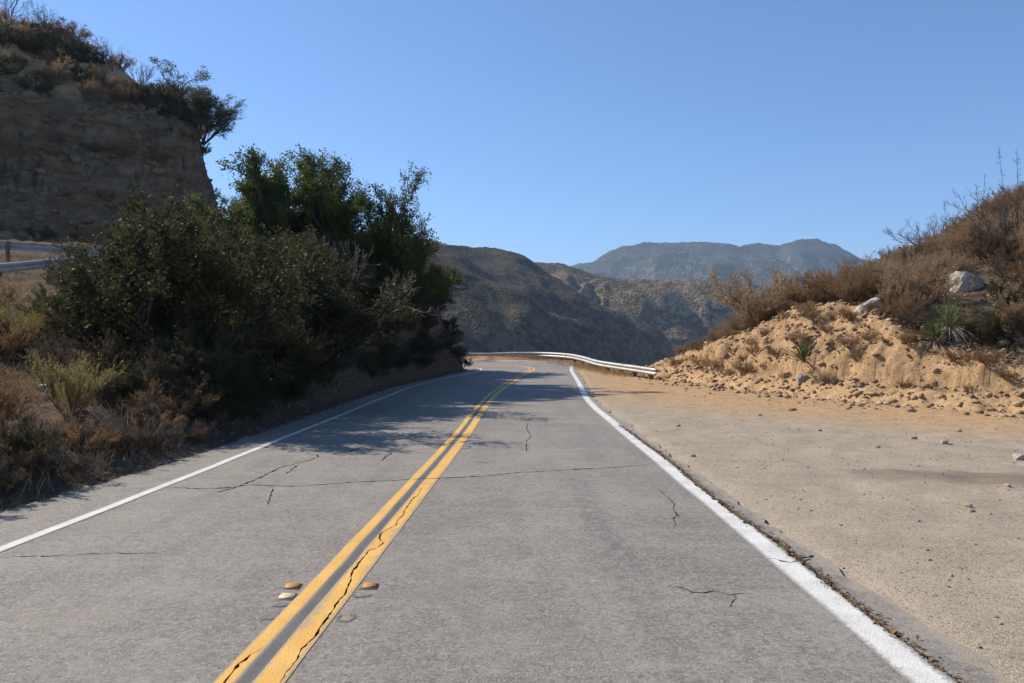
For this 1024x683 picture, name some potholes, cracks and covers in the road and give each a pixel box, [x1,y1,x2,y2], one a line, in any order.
crack [282,495,418,680]
crack [133,424,651,504]
crack [633,434,958,681]
